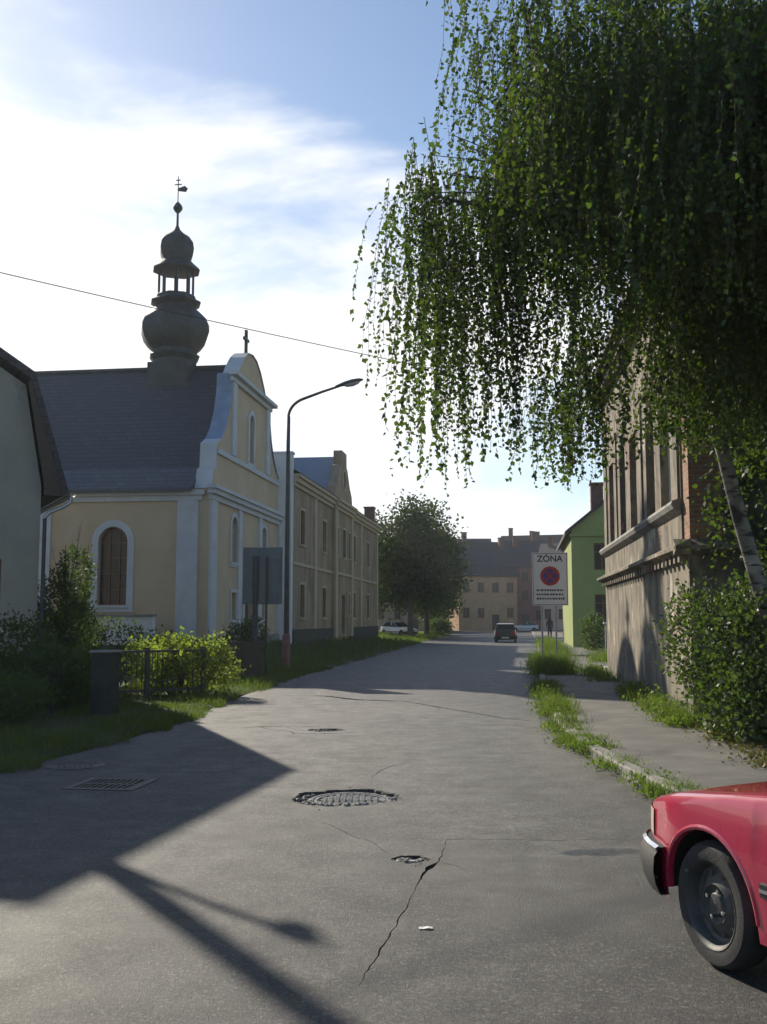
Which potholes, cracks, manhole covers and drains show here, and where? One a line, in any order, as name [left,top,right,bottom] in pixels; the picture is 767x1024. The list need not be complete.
crack [358,839,635,986]
pothole [391,855,431,866]
manhole cover [262,786,403,810]
manhole cover [45,761,105,770]
crack [314,695,529,721]
drain grate [62,777,159,791]
